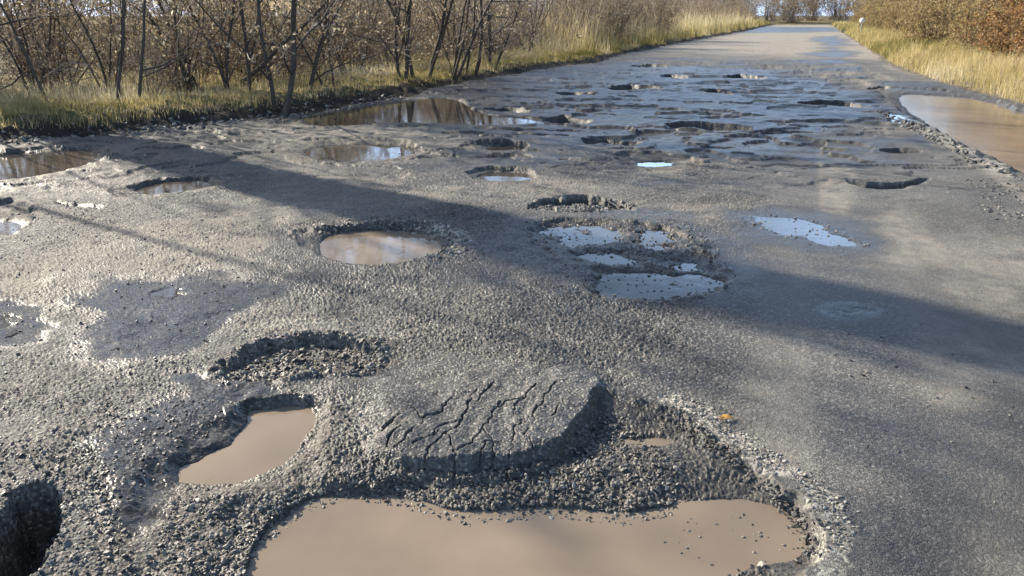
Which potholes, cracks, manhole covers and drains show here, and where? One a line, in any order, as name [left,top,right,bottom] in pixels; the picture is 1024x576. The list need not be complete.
pothole [664,121,754,132]
pothole [285,220,464,267]
pothole [0,145,122,186]
pothole [201,329,402,391]
pothole [463,165,547,185]
pothole [581,137,644,146]
pothole [456,138,532,155]
pothole [514,215,743,306]
pothole [266,135,432,167]
pothole [797,100,872,108]
pothole [846,177,931,190]
pothole [0,480,71,576]
